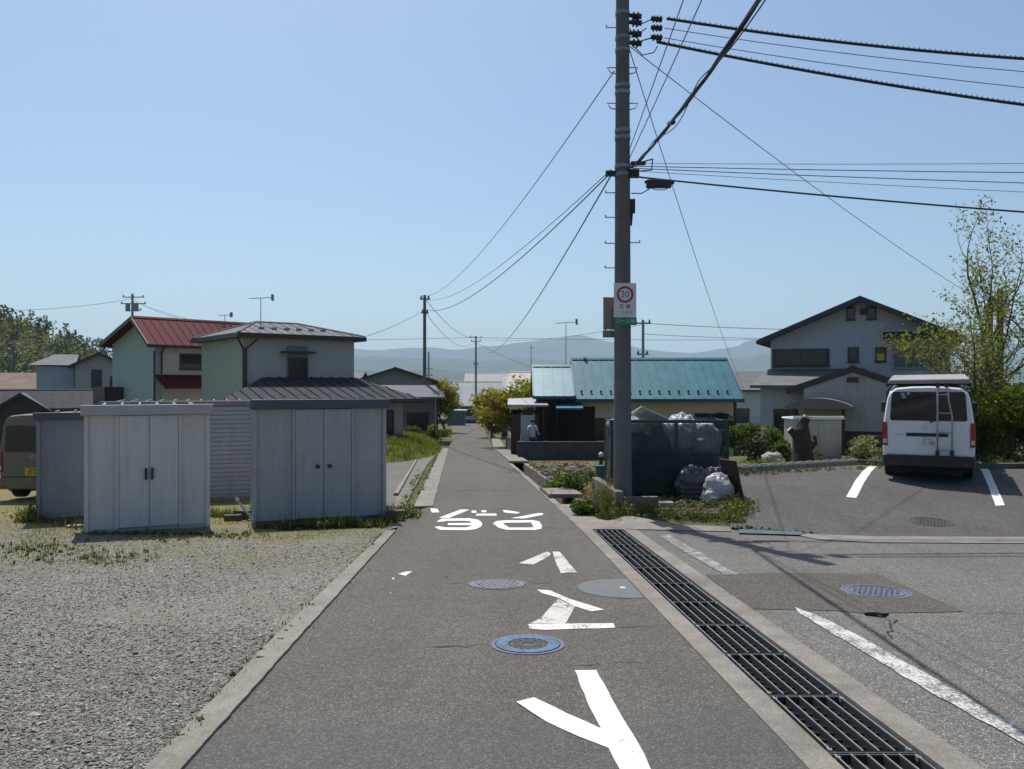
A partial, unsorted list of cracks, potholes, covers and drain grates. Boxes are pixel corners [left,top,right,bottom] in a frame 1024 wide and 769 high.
drain grate [608,544,654,555]
drain grate [830,754,936,769]
drain grate [634,567,691,583]
manhole cover [908,517,955,527]
drain grate [600,536,640,544]
manhole cover [840,584,913,599]
drain grate [669,602,748,625]
drain grate [694,625,786,654]
manhole cover [576,578,644,599]
manhole cover [468,577,526,590]
drain grate [769,696,918,754]
drain grate [724,654,842,696]
